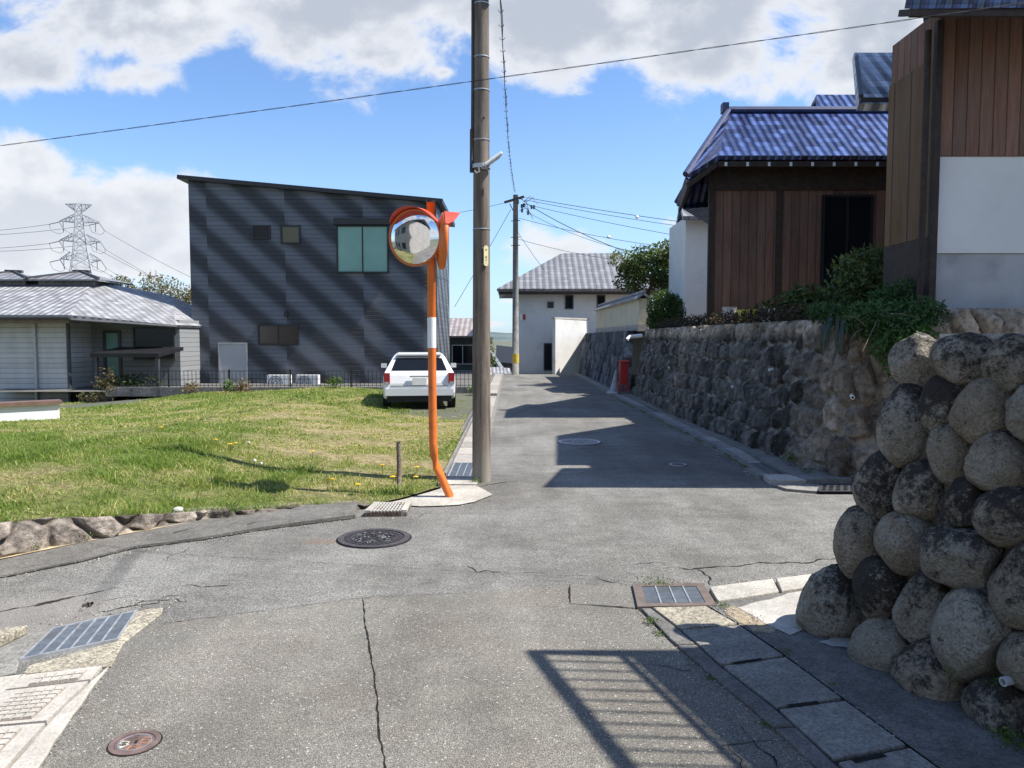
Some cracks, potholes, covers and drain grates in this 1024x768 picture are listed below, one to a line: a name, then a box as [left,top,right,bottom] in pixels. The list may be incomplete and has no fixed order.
drain grate [20,610,138,662]
manhole cover [336,528,412,549]
drain grate [817,483,853,494]
drain grate [365,501,411,517]
crack [362,599,386,768]
manhole cover [106,730,163,757]
crack [100,580,256,615]
drain grate [632,583,717,610]
crack [636,558,836,584]
